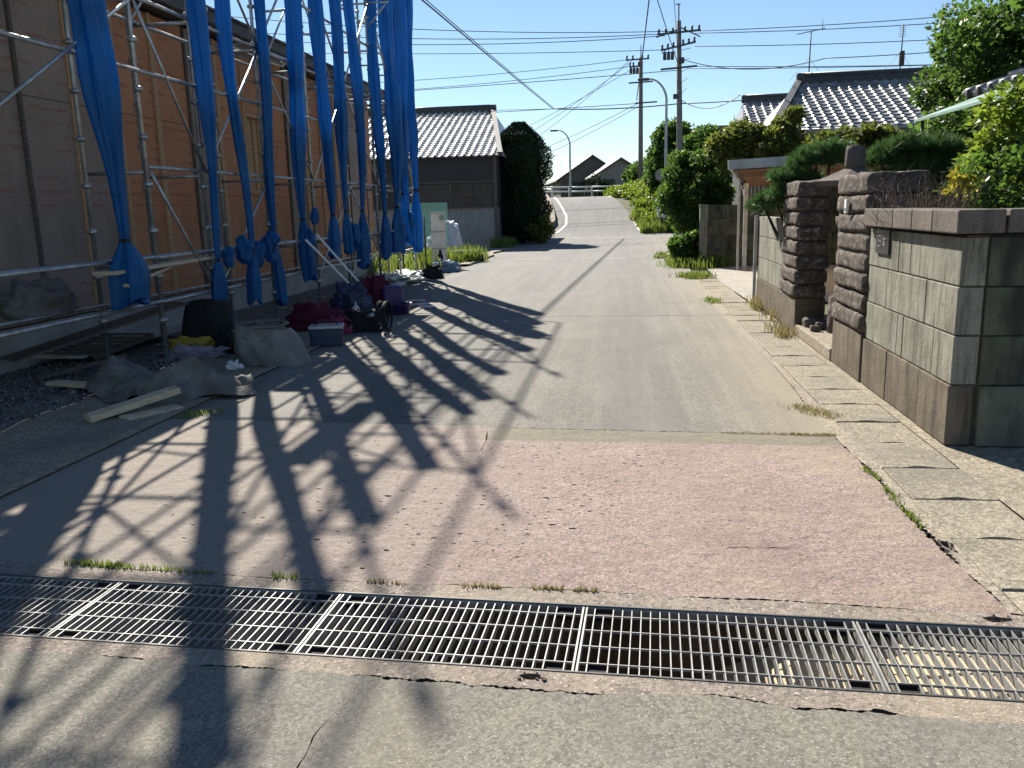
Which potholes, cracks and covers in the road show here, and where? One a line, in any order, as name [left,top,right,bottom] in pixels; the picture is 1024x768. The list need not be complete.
drain grate [575,606,887,691]
drain grate [0,576,121,636]
crack [341,674,621,696]
crack [296,722,326,768]
drain grate [855,621,1024,700]
drain grate [296,594,585,671]
drain grate [47,582,342,653]
crack [832,433,1004,606]
crack [701,694,904,716]
